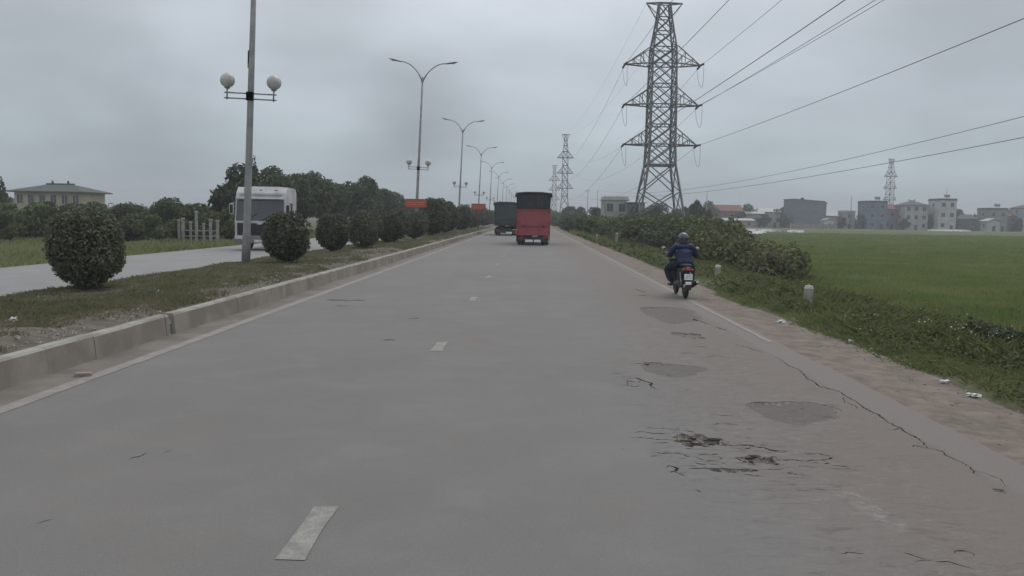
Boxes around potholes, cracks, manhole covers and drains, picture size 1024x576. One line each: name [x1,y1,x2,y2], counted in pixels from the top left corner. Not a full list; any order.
crack [777,357,1007,487]
pothole [672,434,732,449]
pothole [733,454,780,465]
crack [623,415,849,492]
